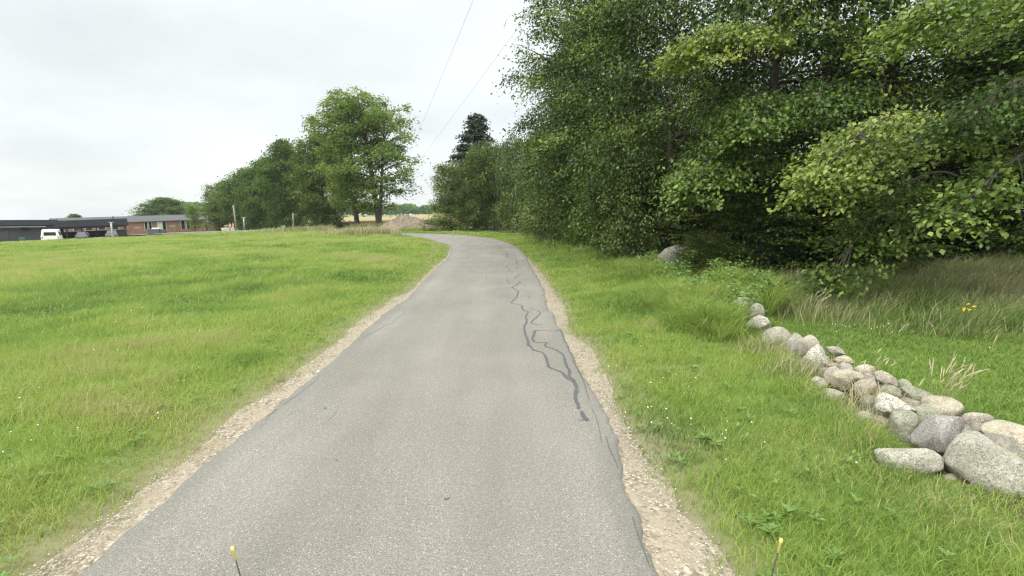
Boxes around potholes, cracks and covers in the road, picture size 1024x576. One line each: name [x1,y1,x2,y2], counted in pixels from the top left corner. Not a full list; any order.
crack [560,330,618,468]
